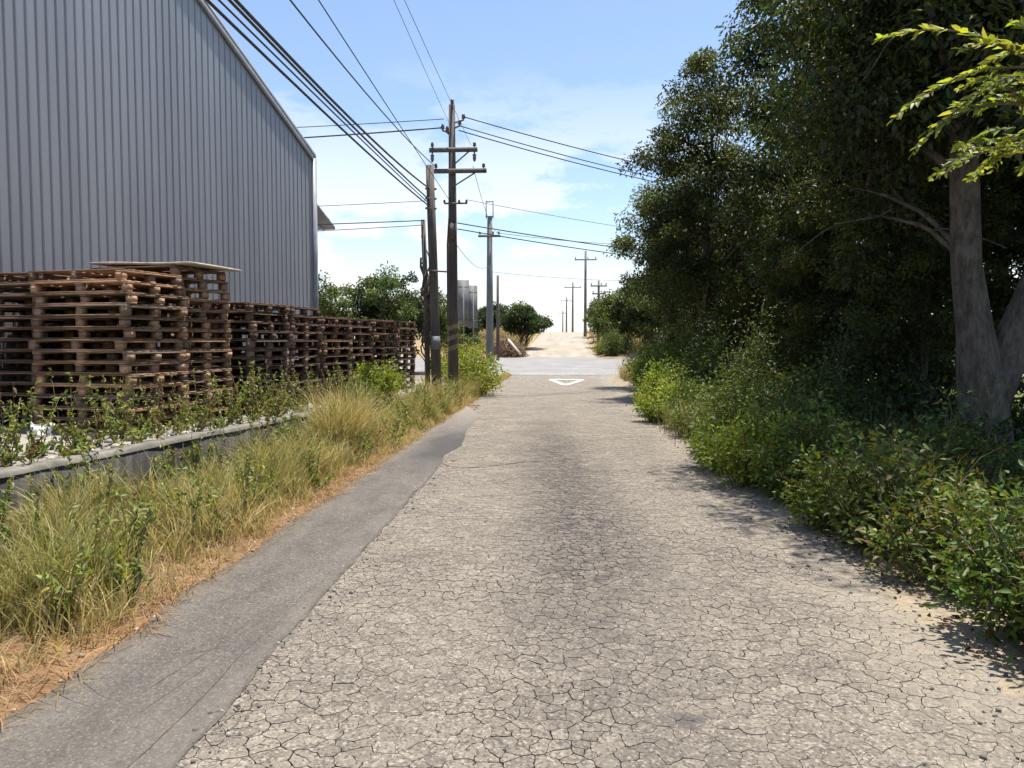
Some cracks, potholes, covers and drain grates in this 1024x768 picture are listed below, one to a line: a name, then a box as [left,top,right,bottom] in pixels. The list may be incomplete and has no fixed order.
crack [127,375,1024,768]
